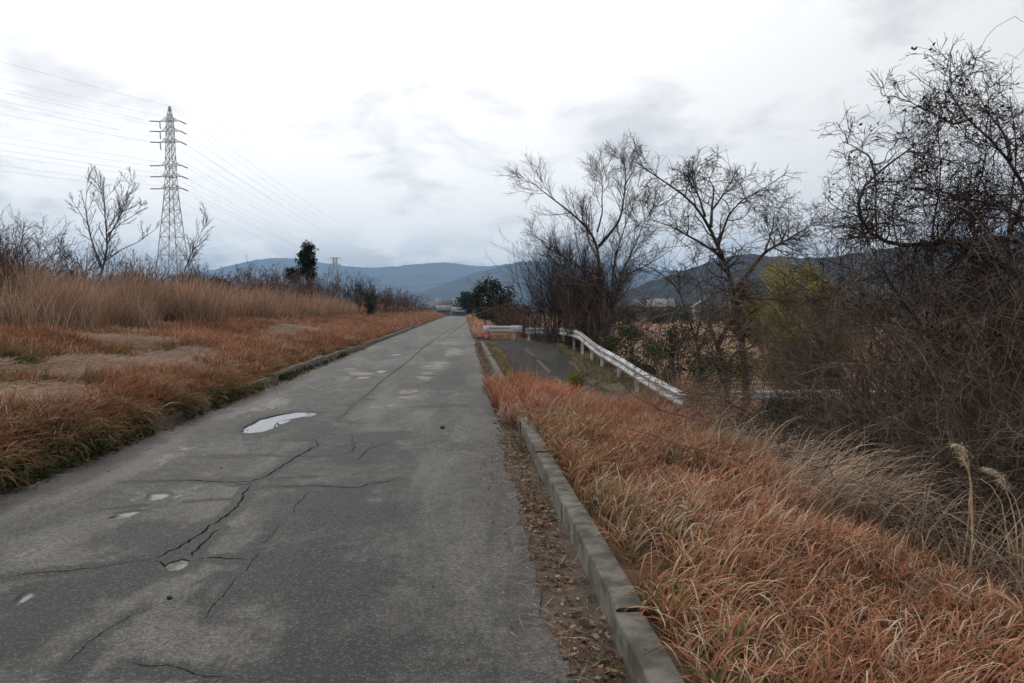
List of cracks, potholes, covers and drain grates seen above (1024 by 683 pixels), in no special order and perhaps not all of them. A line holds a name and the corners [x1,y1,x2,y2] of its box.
pothole [241,412,318,433]
crack [1,325,455,618]
crack [70,612,136,660]
pothole [164,558,190,571]
crack [132,662,226,678]
pothole [12,589,41,606]
